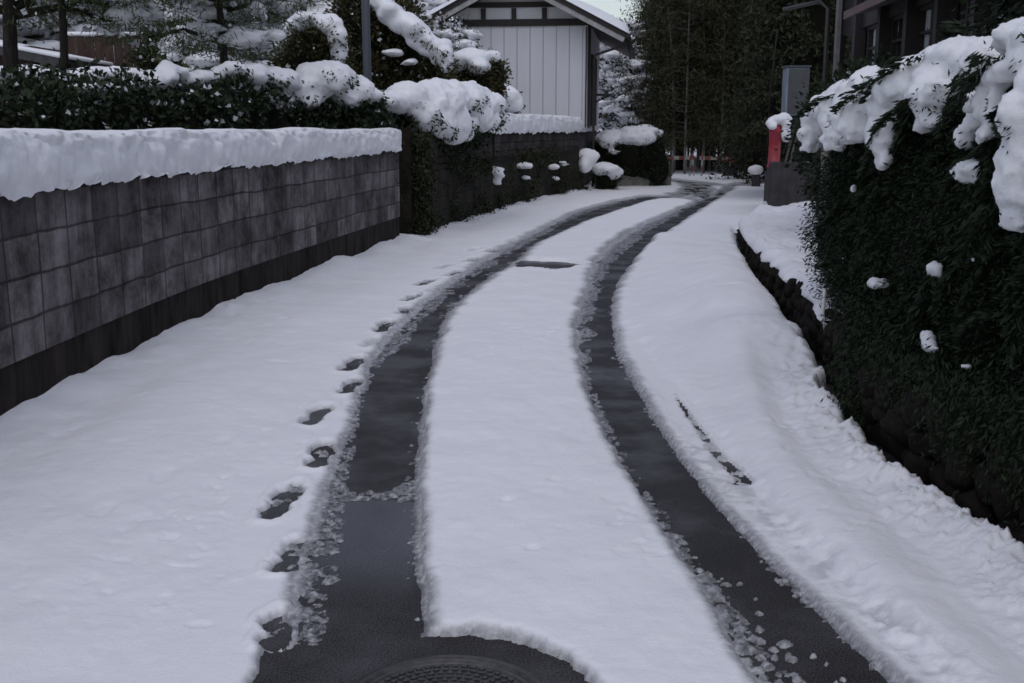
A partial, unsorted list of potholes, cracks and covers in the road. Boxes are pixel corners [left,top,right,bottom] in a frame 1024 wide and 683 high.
manhole cover [355,655,543,683]
